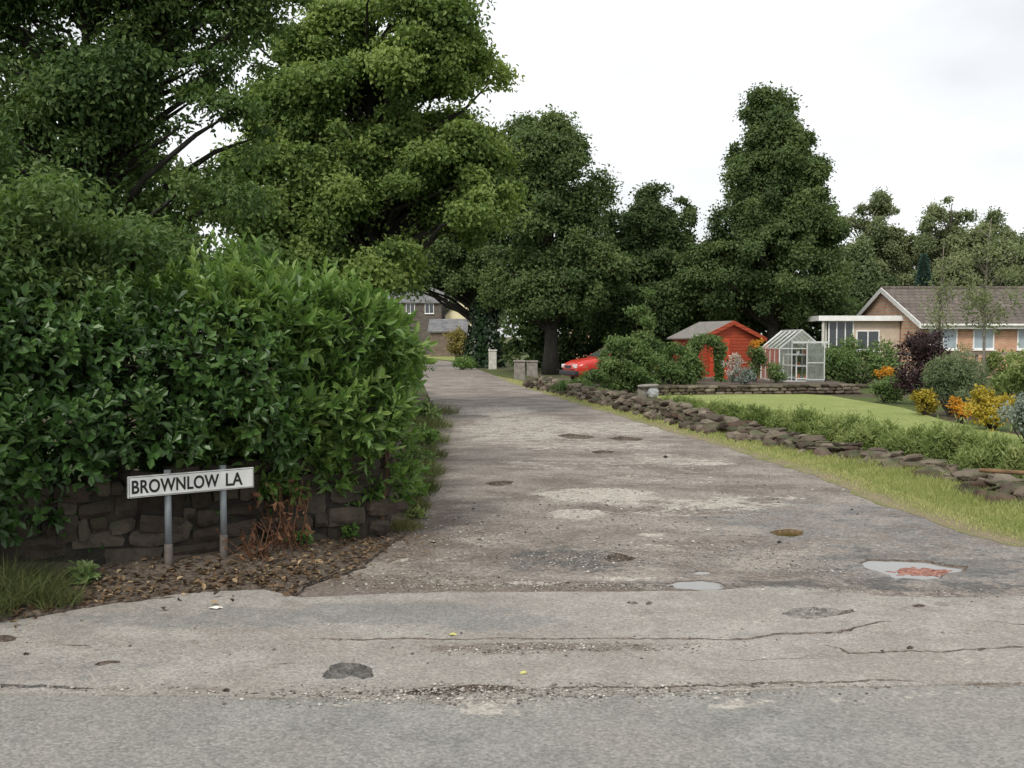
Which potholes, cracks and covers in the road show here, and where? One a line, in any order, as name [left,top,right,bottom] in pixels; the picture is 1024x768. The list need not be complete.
pothole [859,559,968,580]
pothole [604,553,636,562]
crack [313,621,1024,654]
crack [543,679,919,689]
pothole [664,580,727,590]
pothole [769,529,803,537]
